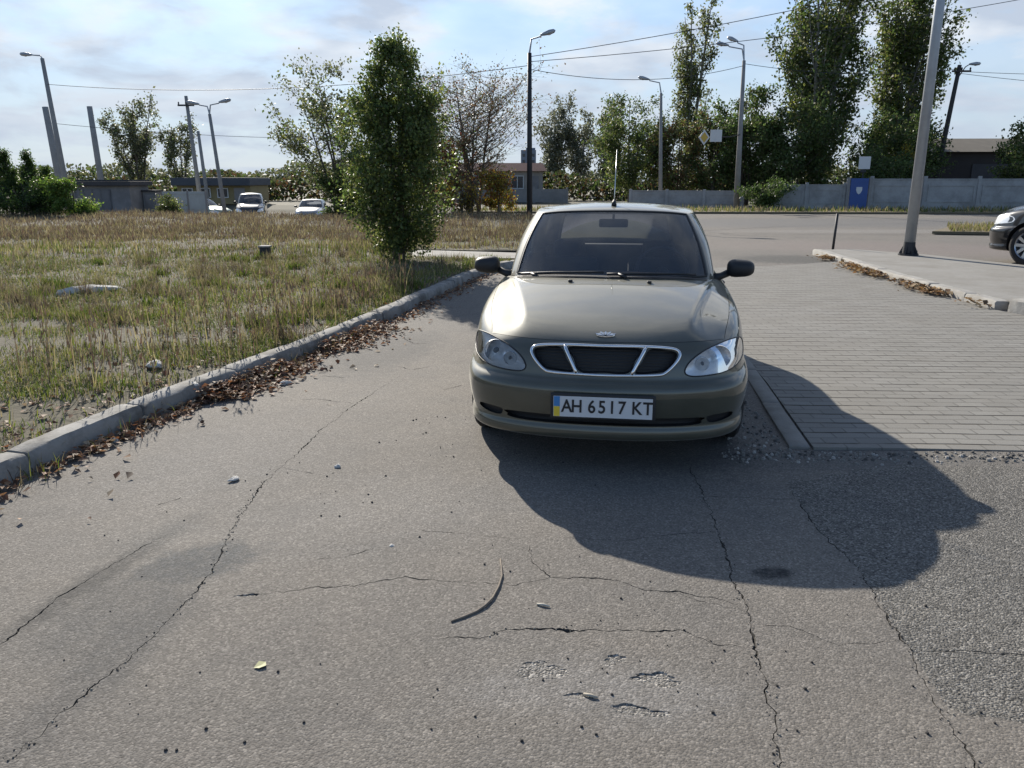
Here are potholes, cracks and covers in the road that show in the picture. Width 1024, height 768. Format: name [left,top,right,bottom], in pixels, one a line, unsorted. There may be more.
crack [240,548,747,614]
crack [563,462,1024,768]
pothole [516,660,569,681]
pothole [604,654,627,666]
crack [421,628,749,648]
pothole [629,671,683,688]
crack [11,381,391,760]
pothole [610,703,670,718]
